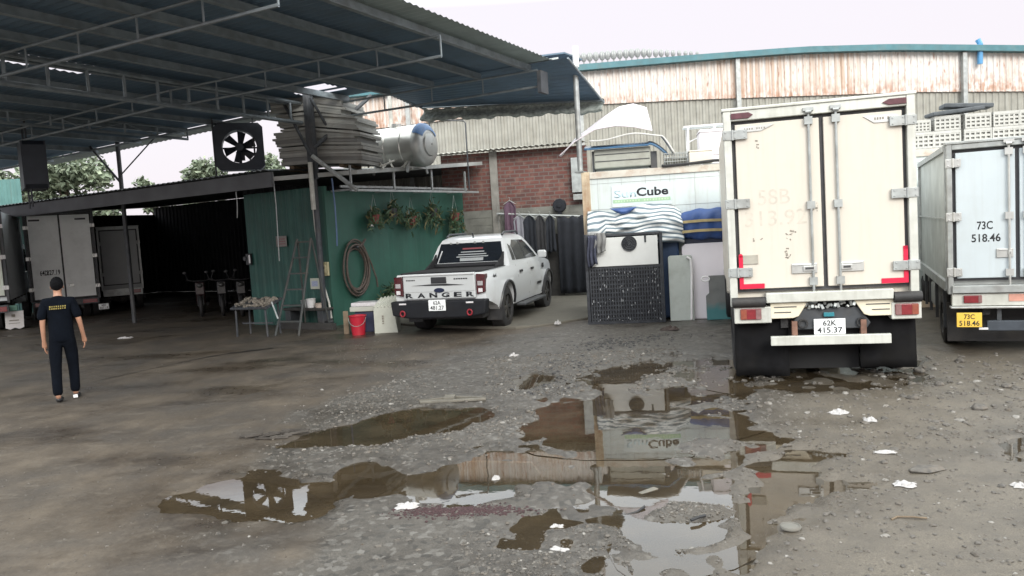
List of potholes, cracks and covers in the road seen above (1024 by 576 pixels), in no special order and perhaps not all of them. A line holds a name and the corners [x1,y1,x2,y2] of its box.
pothole [265,403,501,449]
pothole [508,371,564,391]
